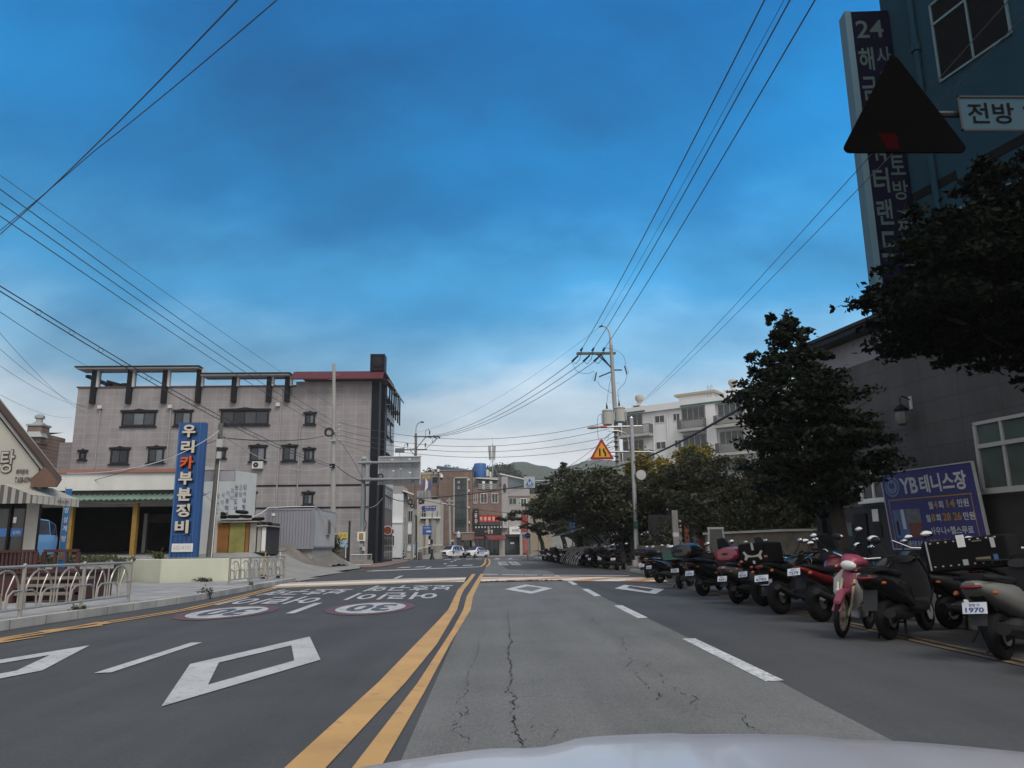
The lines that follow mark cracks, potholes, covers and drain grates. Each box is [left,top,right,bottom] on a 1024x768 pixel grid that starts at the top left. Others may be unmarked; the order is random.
crack [505,612,558,748]
crack [591,620,715,718]
